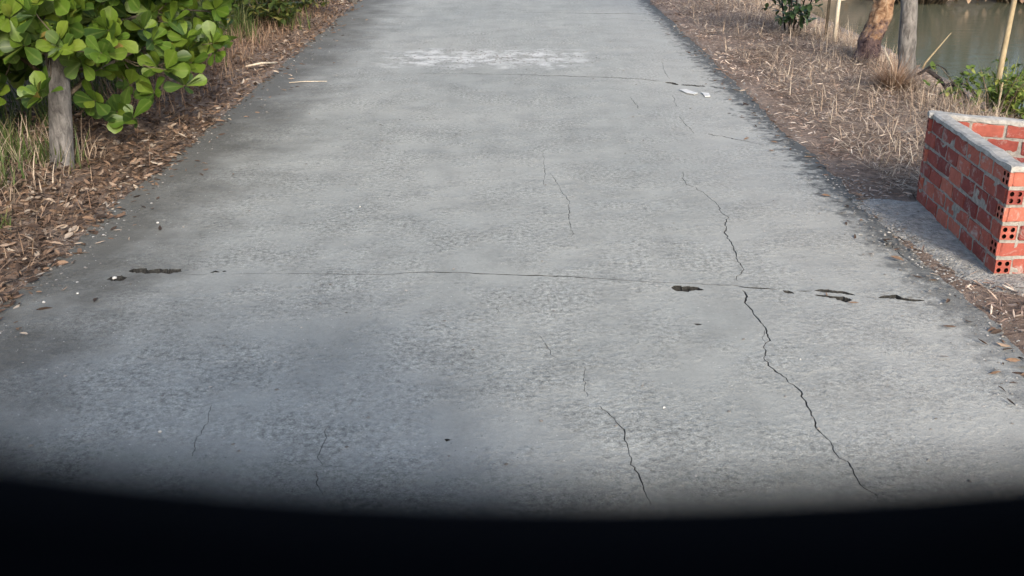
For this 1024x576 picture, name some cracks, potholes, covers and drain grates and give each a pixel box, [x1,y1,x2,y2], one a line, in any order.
crack [497,306,643,484]
pothole [815,289,854,302]
crack [682,171,855,476]
